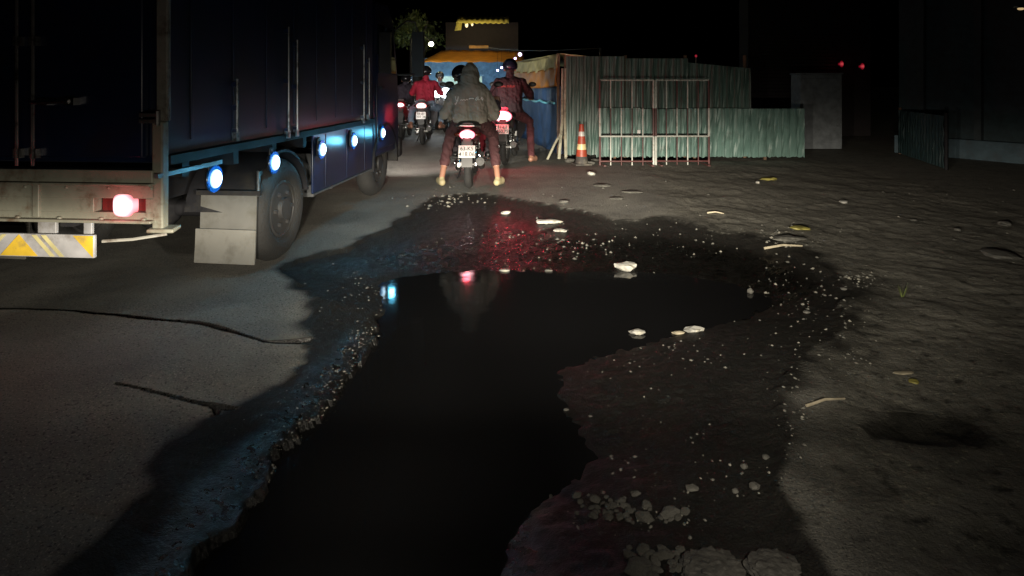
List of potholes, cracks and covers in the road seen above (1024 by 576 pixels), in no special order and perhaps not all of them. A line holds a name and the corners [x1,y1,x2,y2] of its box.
pothole [860,409,994,448]
pothole [58,192,861,576]
crack [113,382,242,416]
crack [33,309,316,344]
